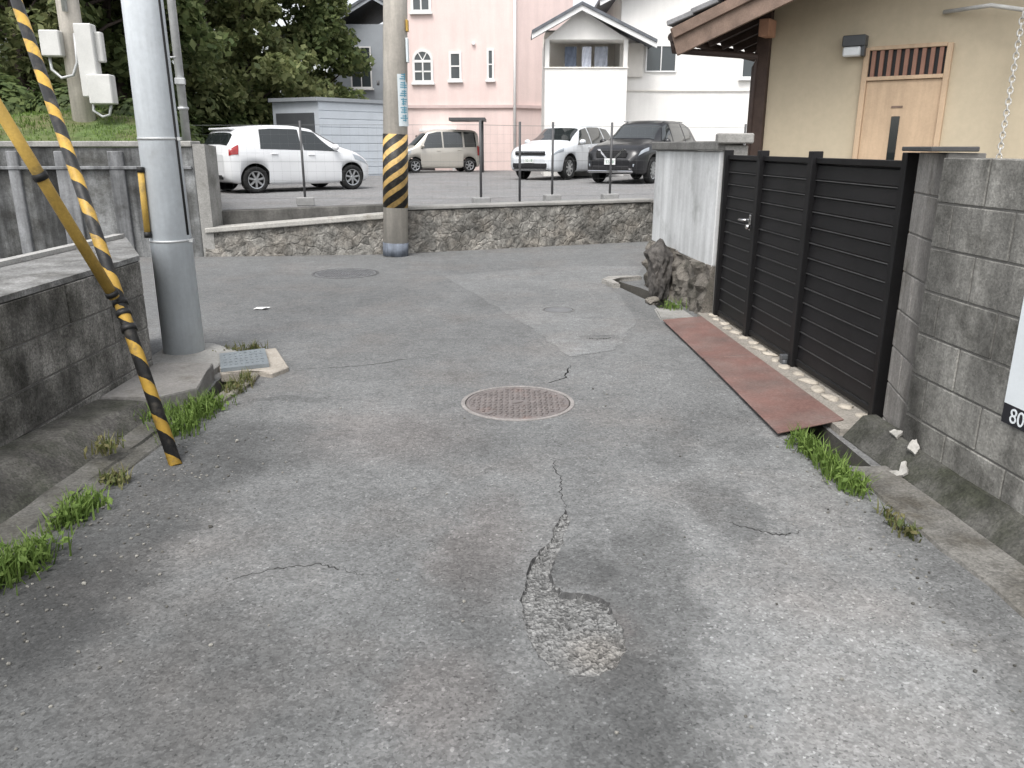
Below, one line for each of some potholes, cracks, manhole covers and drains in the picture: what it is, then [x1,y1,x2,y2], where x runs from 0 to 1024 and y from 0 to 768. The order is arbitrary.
crack [219,563,363,585]
manhole cover [461,386,574,421]
manhole cover [311,268,379,279]
pothole [520,510,627,677]
crack [730,522,800,536]
